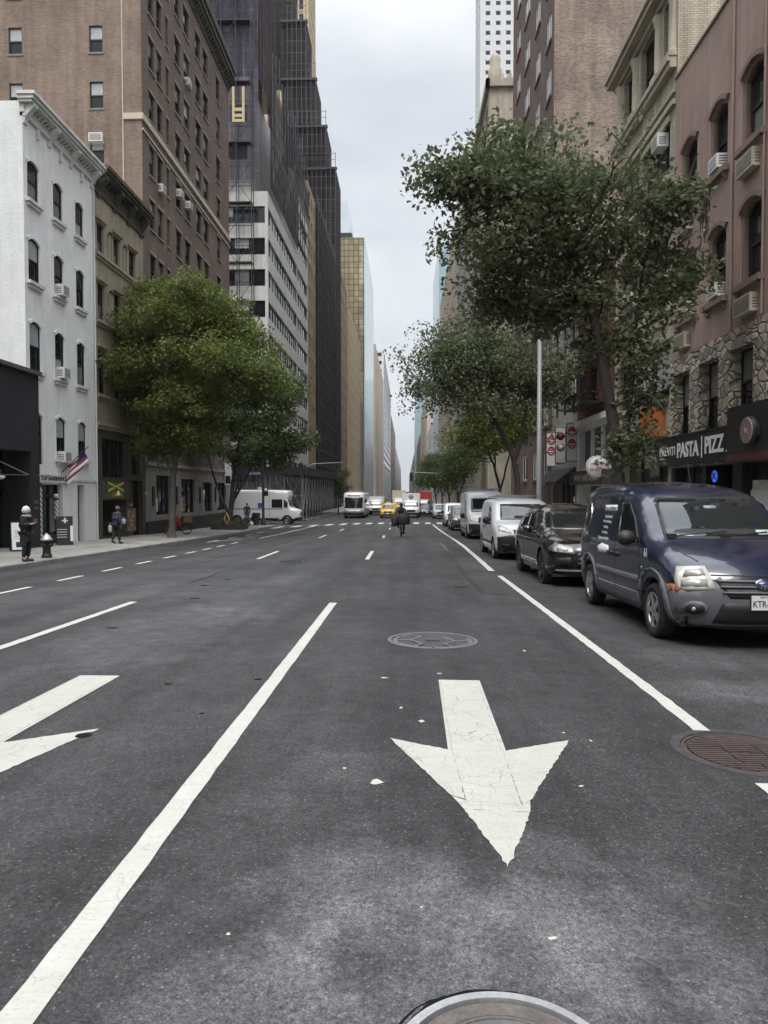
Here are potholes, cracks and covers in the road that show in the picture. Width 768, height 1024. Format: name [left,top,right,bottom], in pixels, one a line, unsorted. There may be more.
manhole cover [670,729,768,777]
manhole cover [388,632,478,649]
